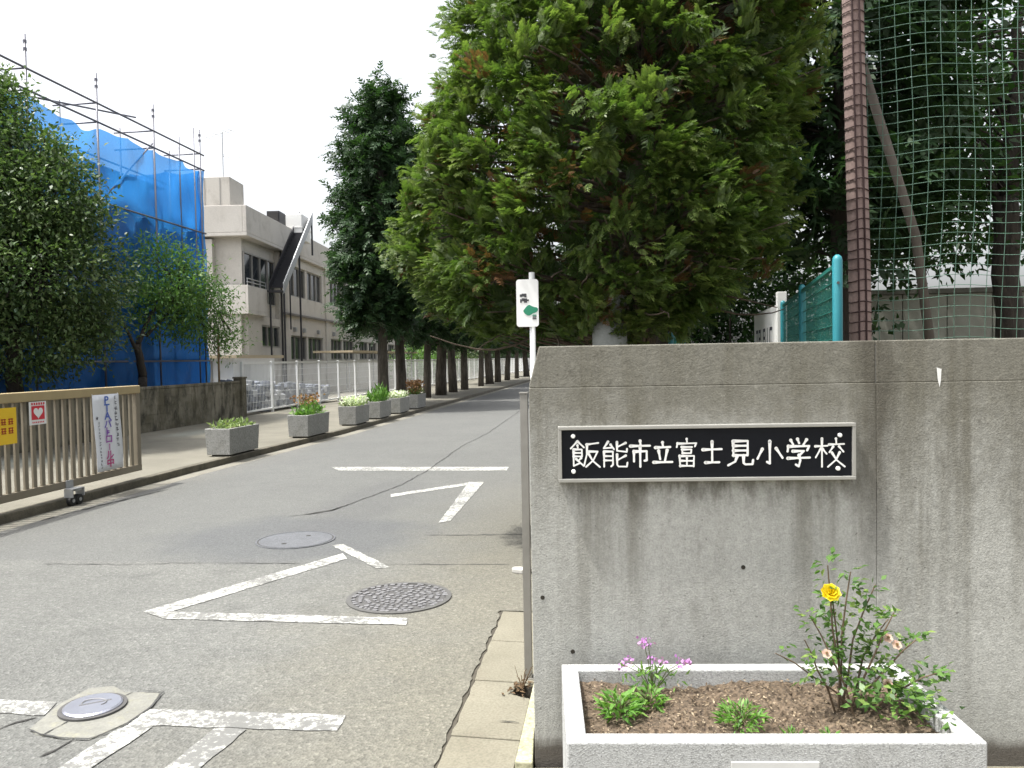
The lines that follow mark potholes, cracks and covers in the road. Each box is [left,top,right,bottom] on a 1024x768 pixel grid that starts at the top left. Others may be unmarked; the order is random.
manhole cover [255,531,336,549]
manhole cover [346,582,452,615]
manhole cover [57,693,128,722]
crack [294,405,529,516]
